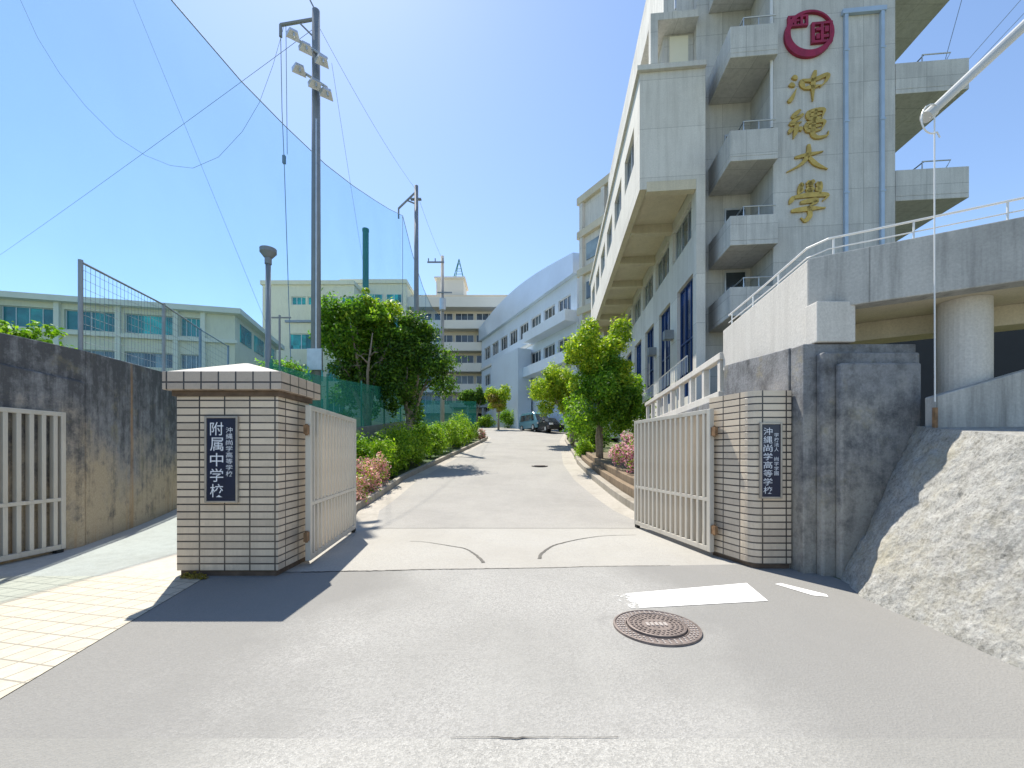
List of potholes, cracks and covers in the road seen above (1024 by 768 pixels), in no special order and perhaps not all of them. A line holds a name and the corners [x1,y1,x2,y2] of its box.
manhole cover [613,610,703,647]
